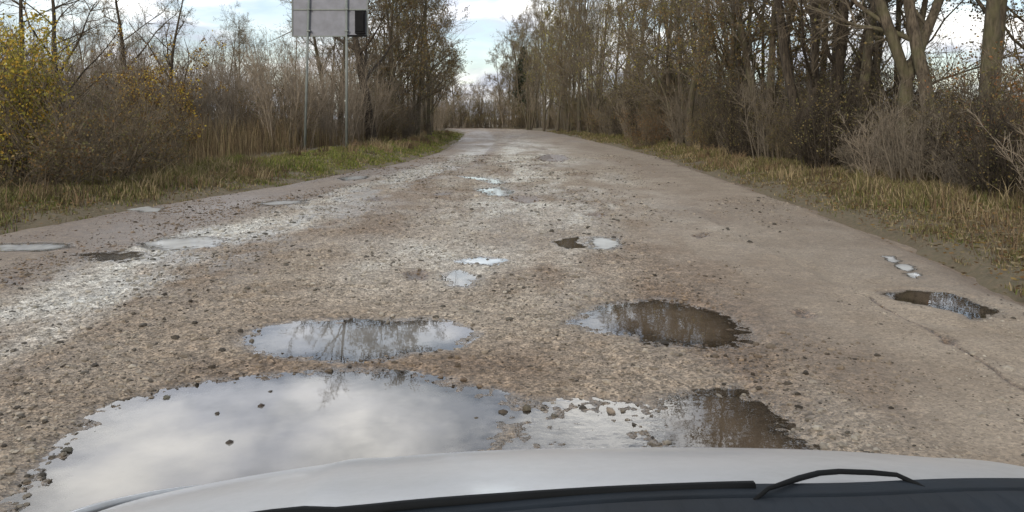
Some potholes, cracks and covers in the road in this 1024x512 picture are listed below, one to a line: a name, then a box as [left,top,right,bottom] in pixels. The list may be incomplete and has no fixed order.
pothole [875,288,1006,321]
pothole [0,365,521,512]
pothole [901,271,927,280]
pothole [645,383,827,451]
pothole [562,296,759,350]
pothole [70,249,157,264]
pothole [234,315,484,364]
pothole [583,236,625,250]
crack [867,296,1024,392]
pothole [0,240,80,252]
pothole [889,262,922,272]
pothole [550,236,588,249]
